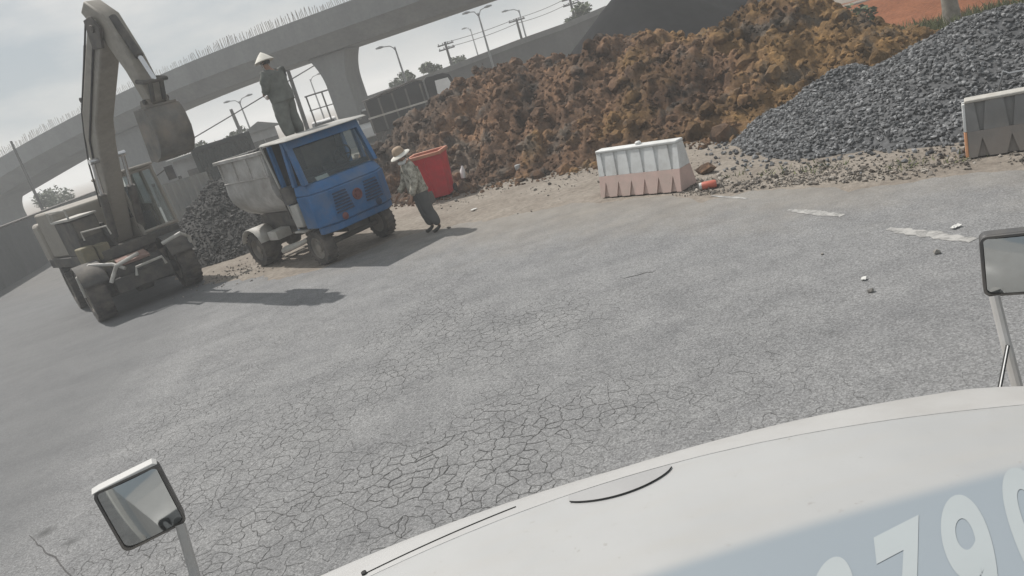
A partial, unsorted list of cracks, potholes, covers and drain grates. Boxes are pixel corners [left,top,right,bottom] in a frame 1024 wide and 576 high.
crack [35,209,989,576]
